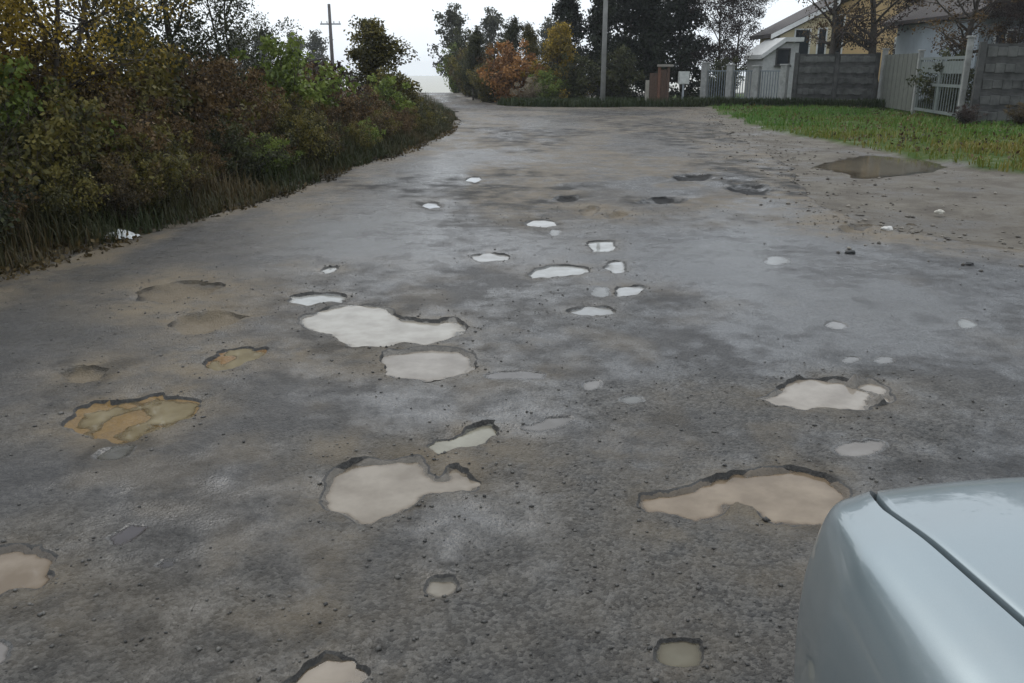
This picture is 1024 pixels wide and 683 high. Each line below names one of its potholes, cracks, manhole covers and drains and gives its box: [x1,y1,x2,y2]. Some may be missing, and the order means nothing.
pothole [287,292,348,306]
pothole [379,345,478,383]
pothole [425,419,500,454]
pothole [297,303,470,347]
pothole [585,240,618,252]
pothole [423,573,460,597]
pothole [135,280,226,304]
pothole [283,650,371,683]
pothole [526,264,590,279]
pothole [653,637,705,668]
pothole [830,437,890,457]
pothole [318,454,481,525]
